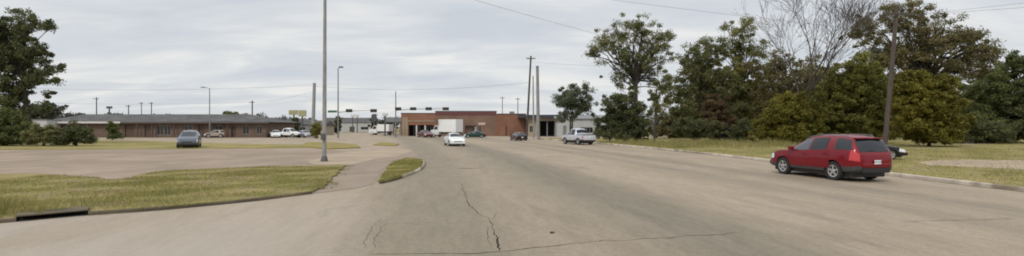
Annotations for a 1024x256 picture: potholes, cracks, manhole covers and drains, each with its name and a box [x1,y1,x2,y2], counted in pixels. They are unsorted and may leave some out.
drain grate [16,206,90,222]
crack [363,168,729,254]
